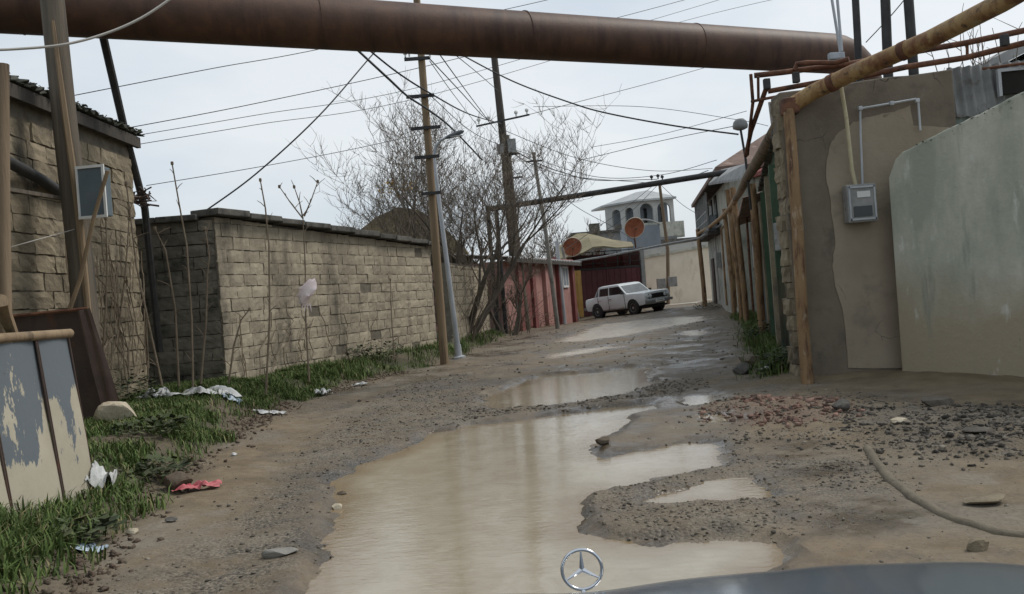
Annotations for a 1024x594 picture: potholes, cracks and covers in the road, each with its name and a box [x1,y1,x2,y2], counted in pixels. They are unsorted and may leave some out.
pothole [286,396,815,594]
pothole [677,391,728,407]
pothole [473,363,660,409]
pothole [546,316,708,343]
